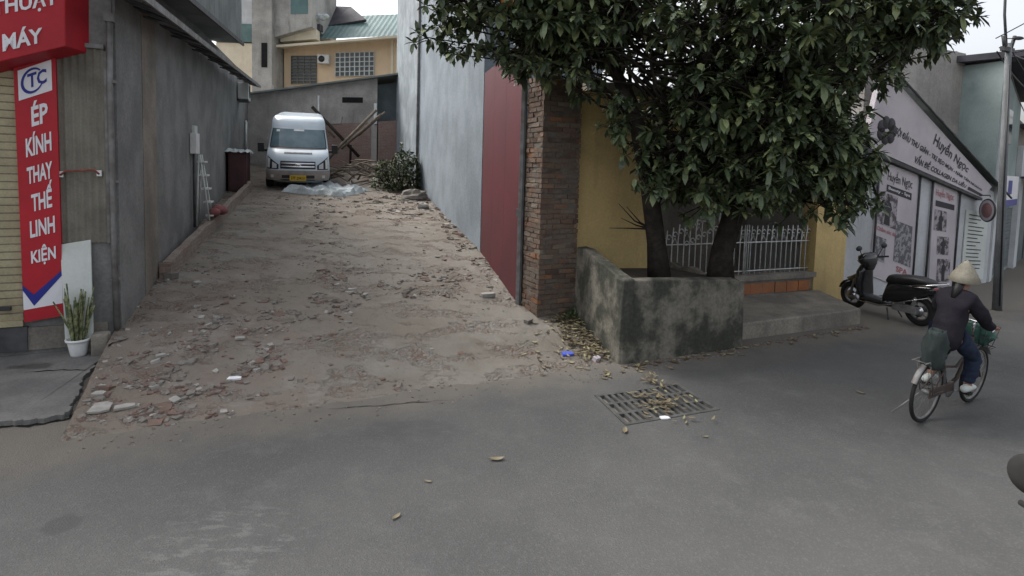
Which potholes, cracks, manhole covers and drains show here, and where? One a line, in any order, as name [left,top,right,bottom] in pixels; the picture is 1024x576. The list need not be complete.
drain grate [594,383,720,426]
